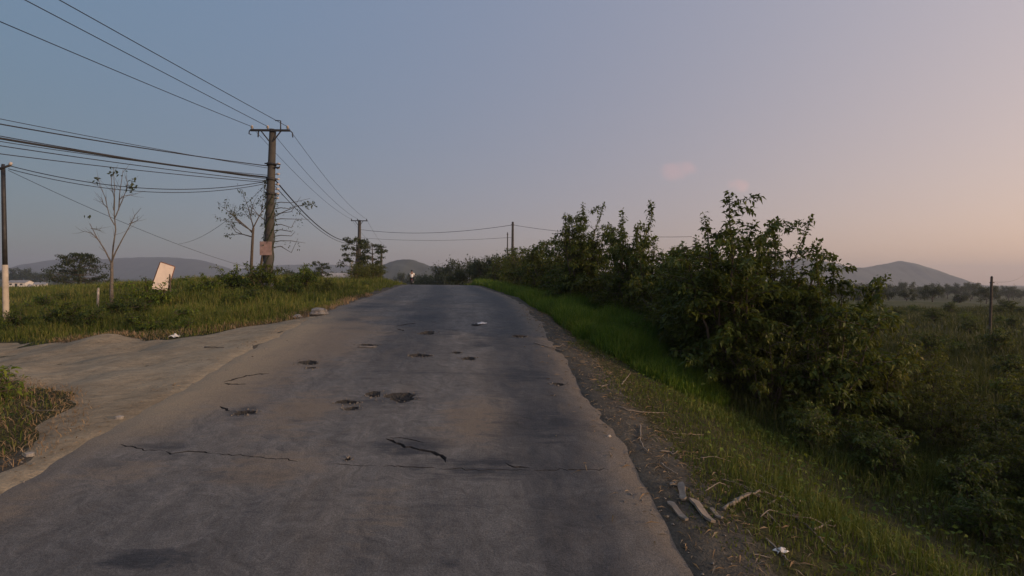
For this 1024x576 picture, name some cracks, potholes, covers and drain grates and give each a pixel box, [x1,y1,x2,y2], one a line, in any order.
crack [225,373,268,385]
crack [121,437,609,471]
pothole [384,393,416,403]
